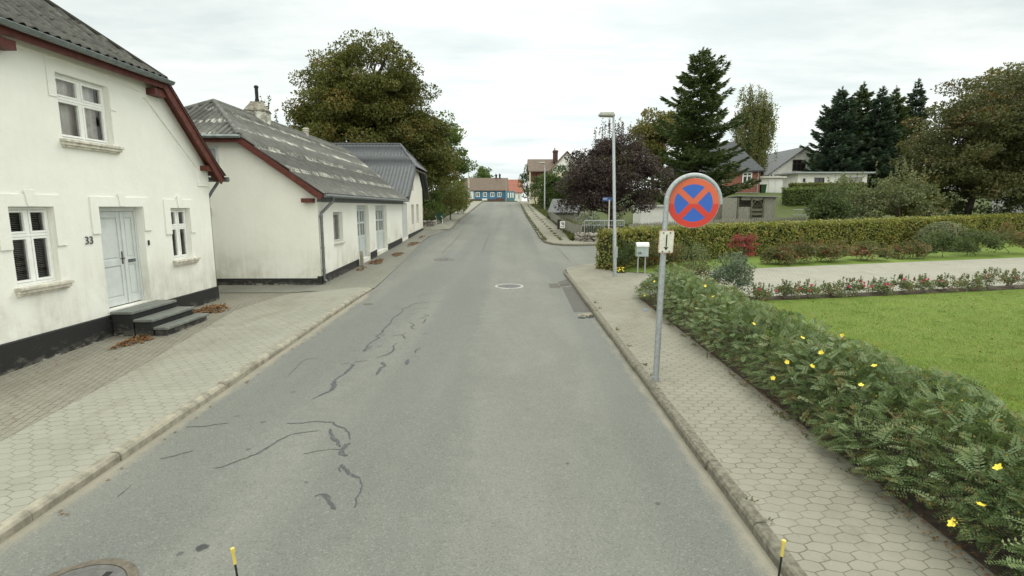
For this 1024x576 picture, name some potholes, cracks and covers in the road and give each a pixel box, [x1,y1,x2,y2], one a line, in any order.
manhole cover [47,558,139,576]
